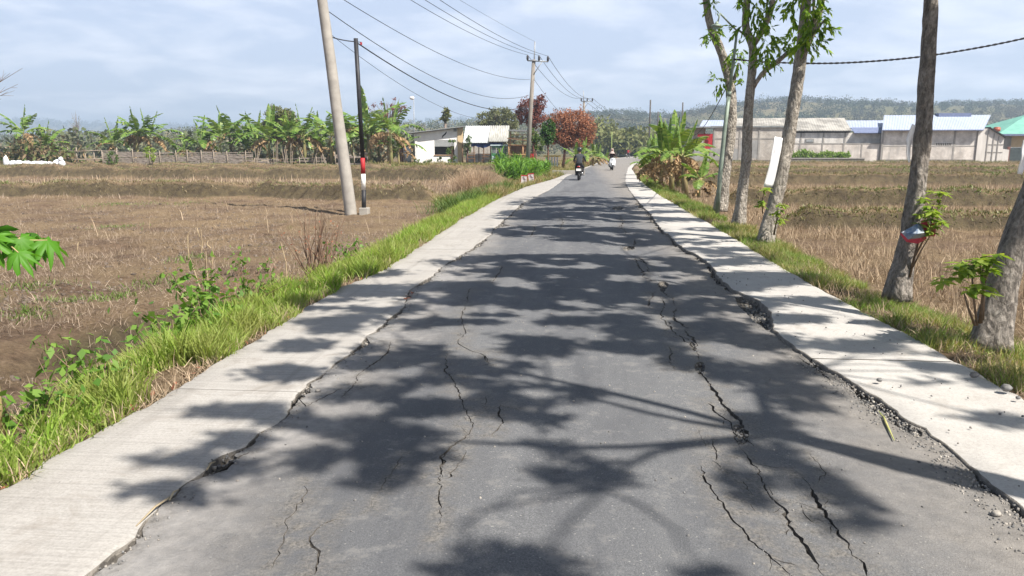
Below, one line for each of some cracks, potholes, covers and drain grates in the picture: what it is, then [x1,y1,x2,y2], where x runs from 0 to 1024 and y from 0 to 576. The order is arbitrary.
crack [619,208,869,576]
crack [271,480,308,569]
crack [343,341,391,396]
crack [427,289,509,536]
